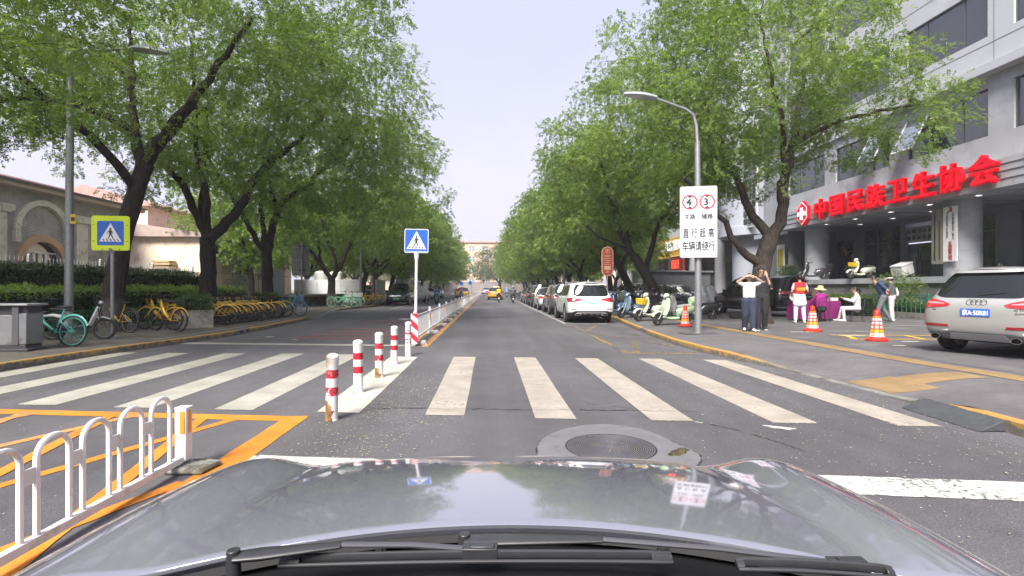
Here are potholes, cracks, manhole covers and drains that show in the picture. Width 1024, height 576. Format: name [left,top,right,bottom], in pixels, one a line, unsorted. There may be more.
manhole cover [536,424,703,465]
